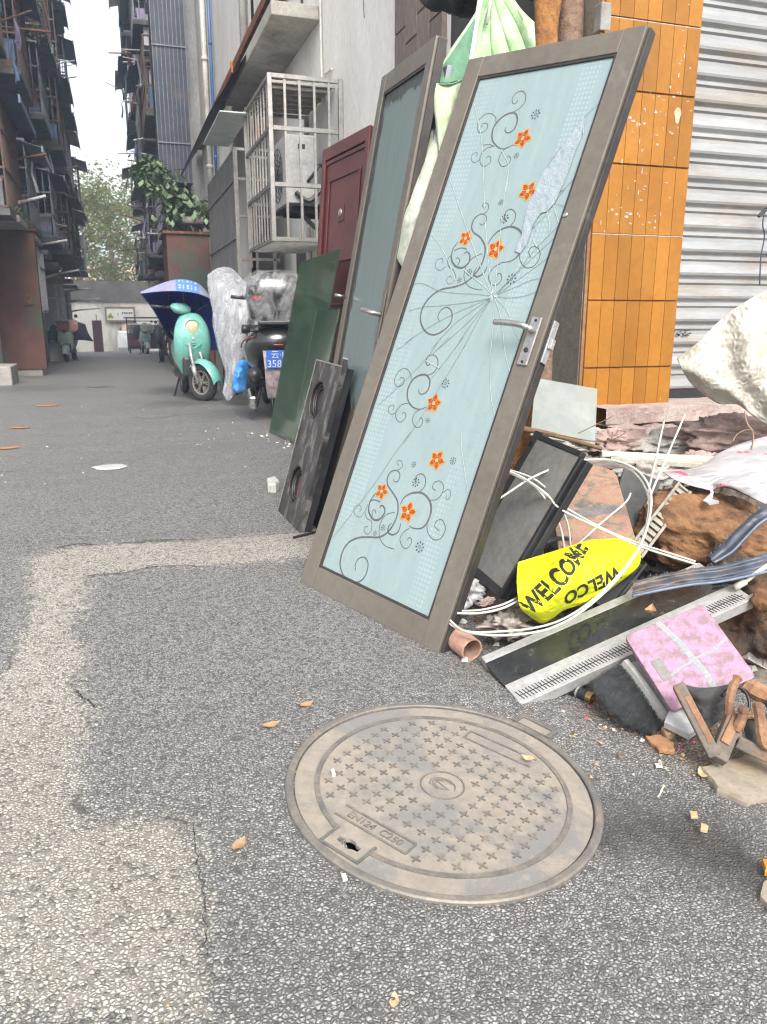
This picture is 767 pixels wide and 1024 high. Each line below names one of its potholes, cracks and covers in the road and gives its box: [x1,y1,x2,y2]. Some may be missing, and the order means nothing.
crack [192,822,208,956]
manhole cover [285,703,604,907]
